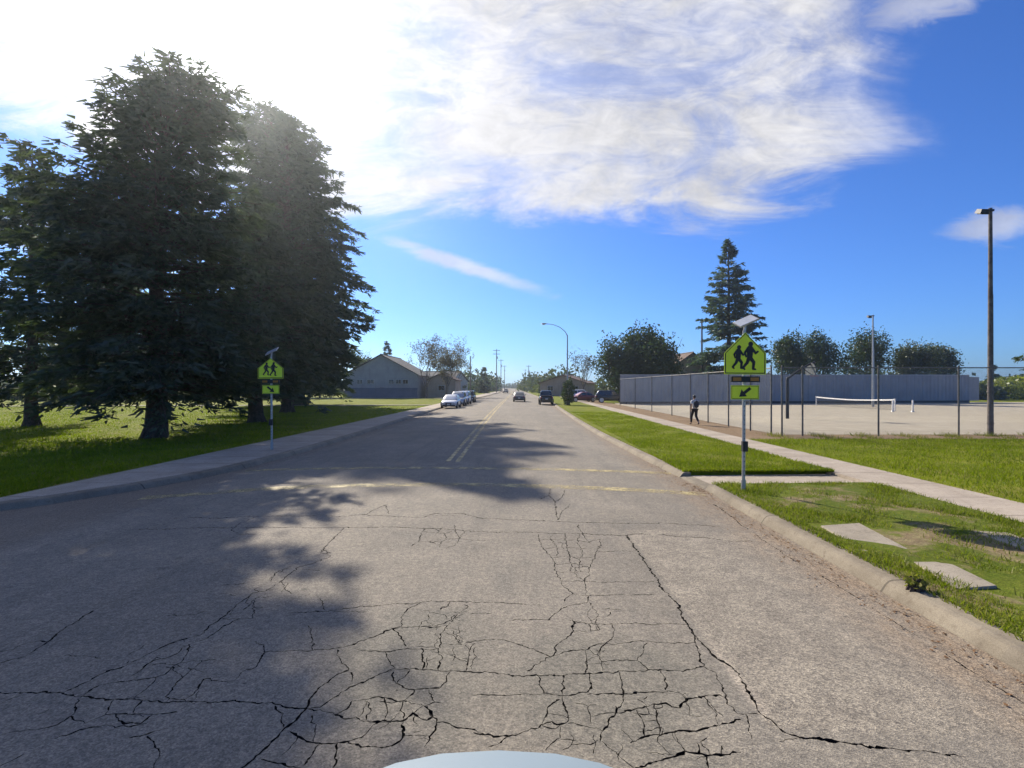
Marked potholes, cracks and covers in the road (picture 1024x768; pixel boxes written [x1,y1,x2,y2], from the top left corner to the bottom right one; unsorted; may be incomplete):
crack [0,489,752,768]
